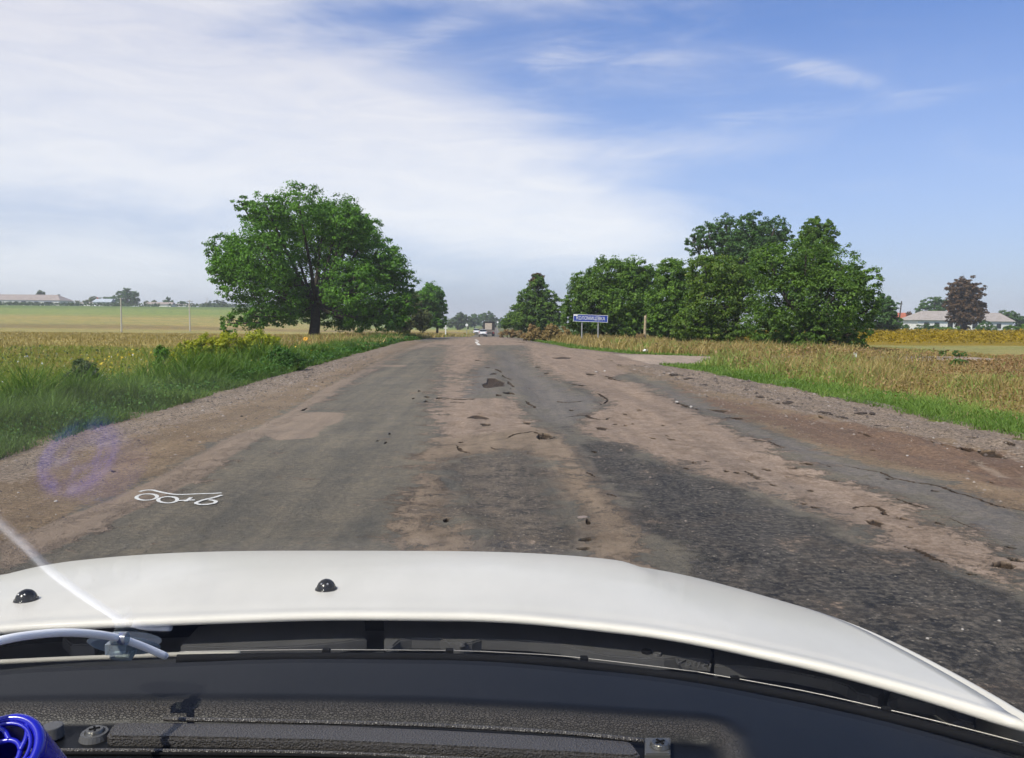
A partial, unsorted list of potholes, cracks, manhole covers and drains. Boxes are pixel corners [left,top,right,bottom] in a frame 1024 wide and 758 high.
crack [844,465,1024,531]
crack [557,376,620,420]
pothole [989,561,1017,569]
pothole [482,378,505,388]
